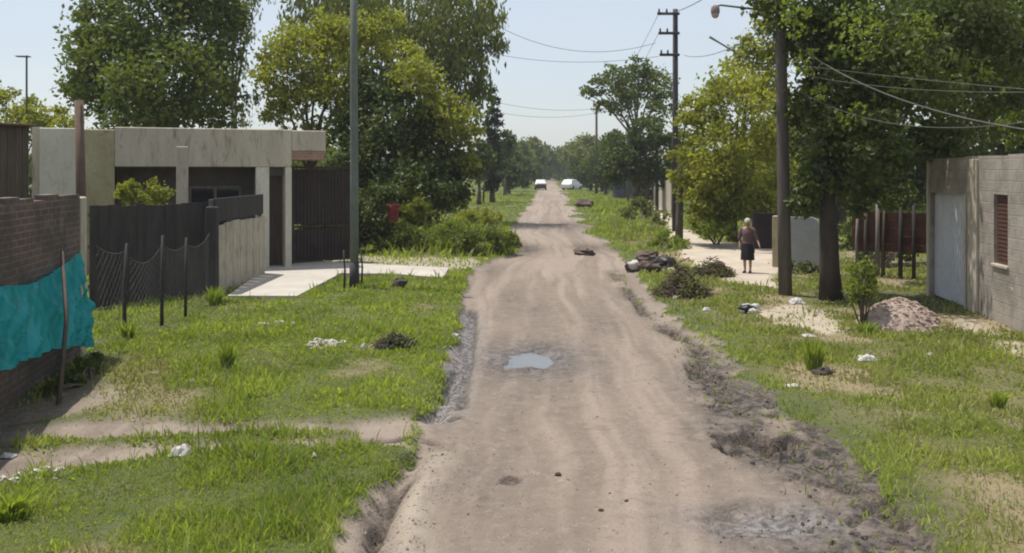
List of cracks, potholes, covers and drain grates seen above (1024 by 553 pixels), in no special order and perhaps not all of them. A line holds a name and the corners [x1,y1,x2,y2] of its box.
pothole [493,345,573,371]
pothole [705,428,806,464]
pothole [497,476,521,486]
